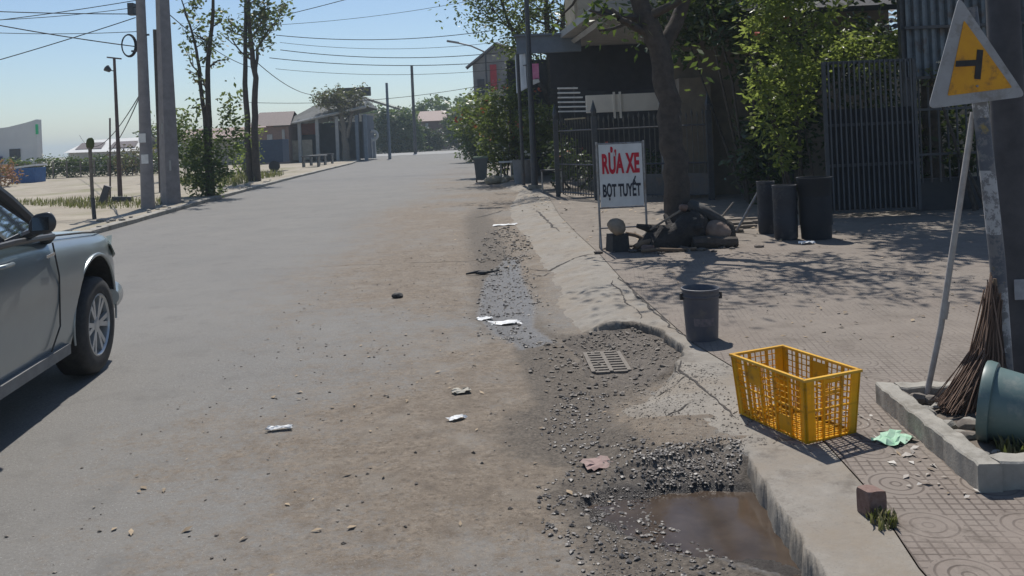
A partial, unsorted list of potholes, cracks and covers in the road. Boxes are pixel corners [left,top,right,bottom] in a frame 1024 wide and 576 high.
pothole [572,444,802,576]
crack [611,276,685,335]
pothole [561,329,681,389]
crack [656,361,735,417]
drain grate [583,350,632,375]
